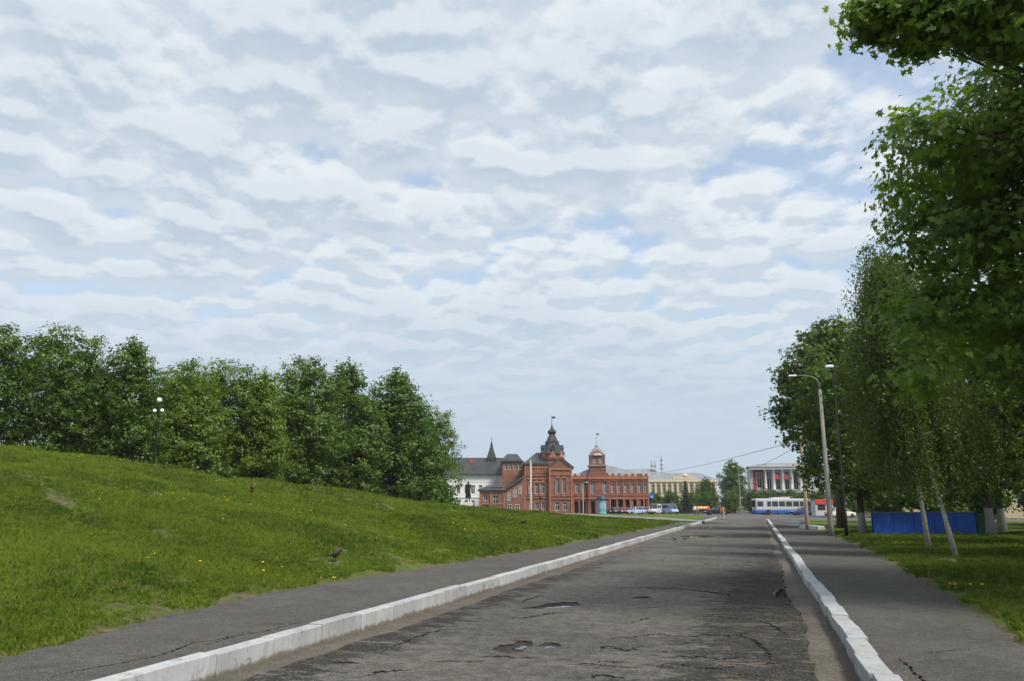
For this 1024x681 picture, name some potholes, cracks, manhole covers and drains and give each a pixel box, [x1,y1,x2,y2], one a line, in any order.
crack [614,587,733,596]
crack [331,629,446,676]
crack [900,649,969,681]
crack [568,606,786,679]
pothole [493,640,533,653]
